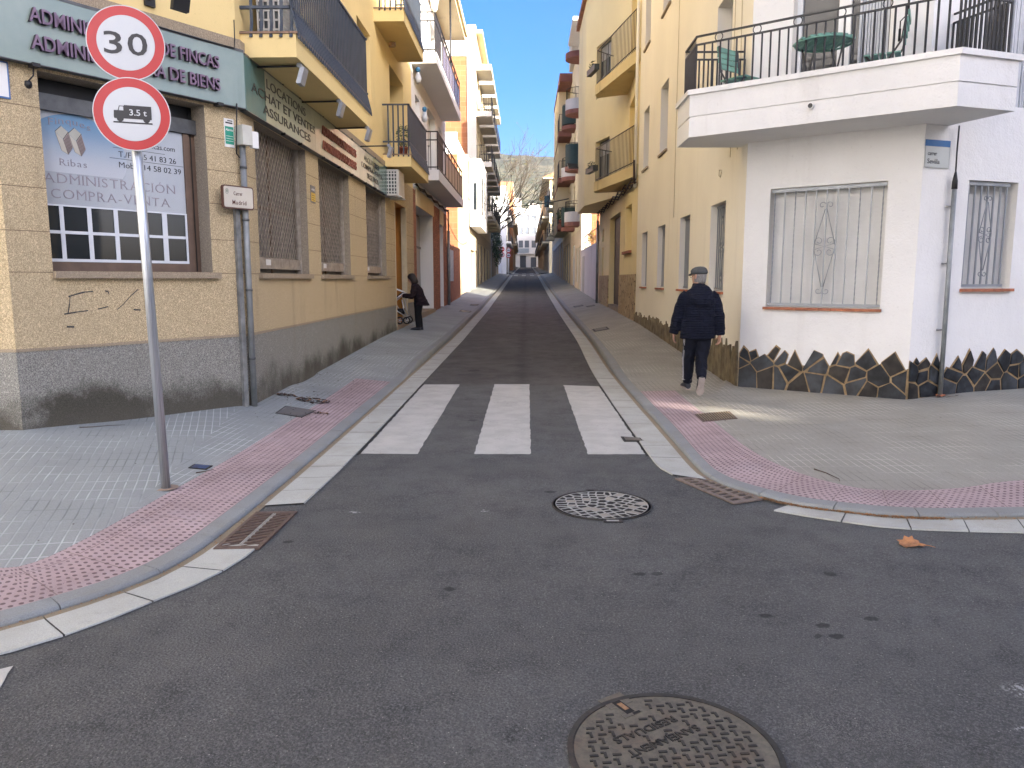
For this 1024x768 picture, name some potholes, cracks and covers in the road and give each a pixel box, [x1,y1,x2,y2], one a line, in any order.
manhole cover [567,692,787,768]
drain grate [695,411,738,422]
drain grate [675,476,763,505]
drain grate [213,511,297,550]
manhole cover [552,489,652,523]
